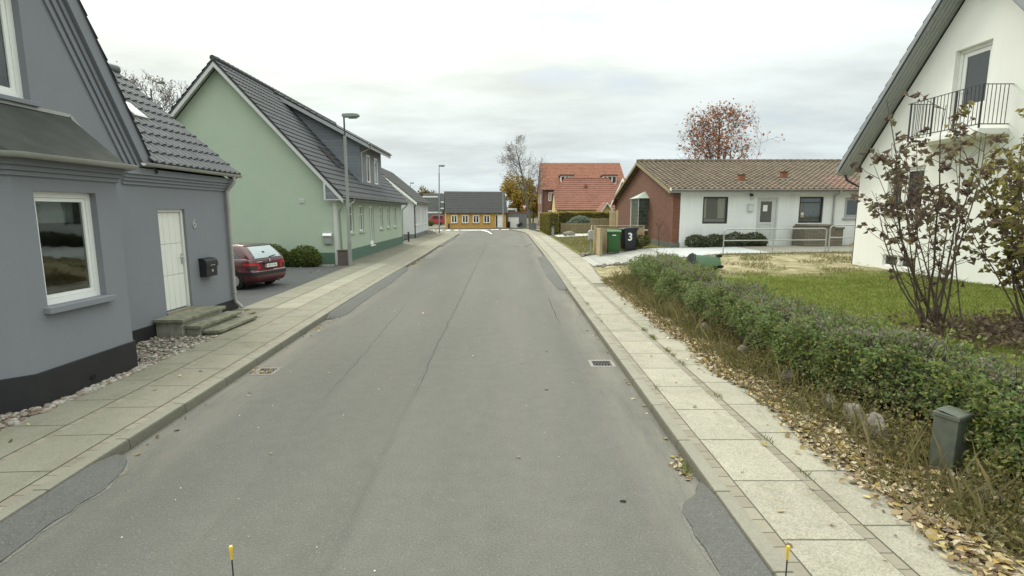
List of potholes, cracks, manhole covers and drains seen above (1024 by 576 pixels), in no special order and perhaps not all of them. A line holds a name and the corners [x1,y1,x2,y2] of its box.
drain grate [249,366,283,375]
